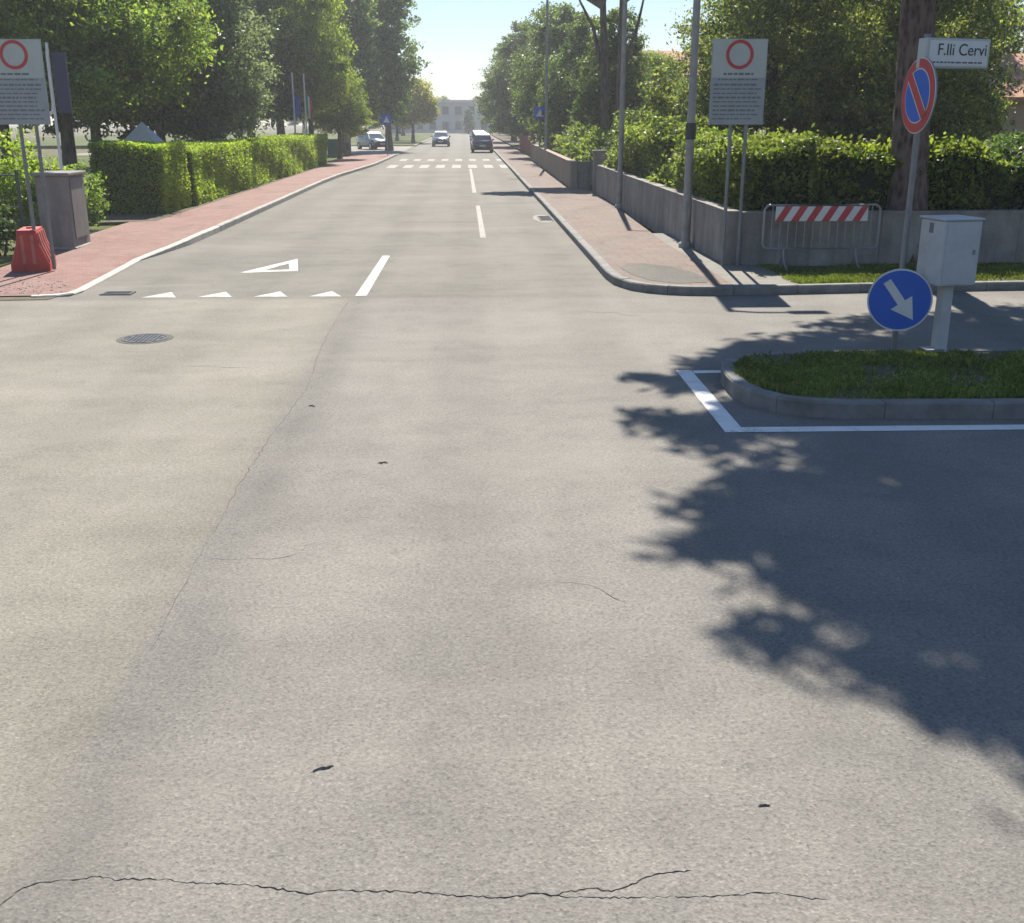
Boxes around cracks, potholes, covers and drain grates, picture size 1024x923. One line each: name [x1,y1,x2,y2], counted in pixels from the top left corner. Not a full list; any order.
crack [149,302,348,652]
crack [0,870,829,906]
manhole cover [116,333,174,344]
